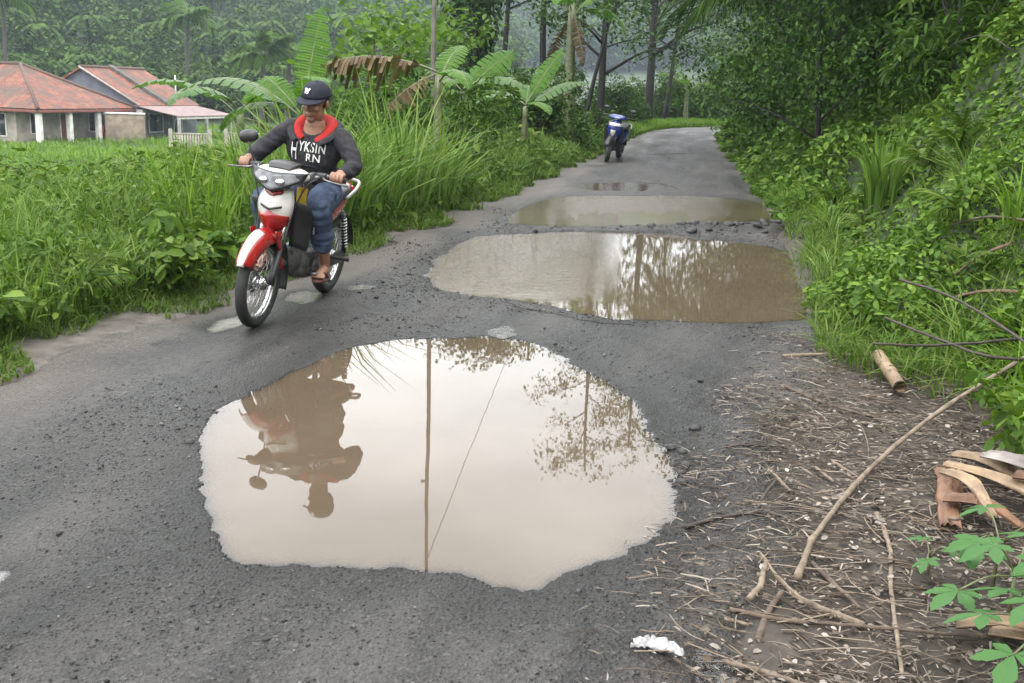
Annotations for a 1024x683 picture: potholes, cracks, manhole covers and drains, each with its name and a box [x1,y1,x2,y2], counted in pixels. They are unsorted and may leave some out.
pothole [494,193,772,229]
pothole [574,181,656,191]
pothole [406,227,811,328]
pothole [147,329,720,616]
